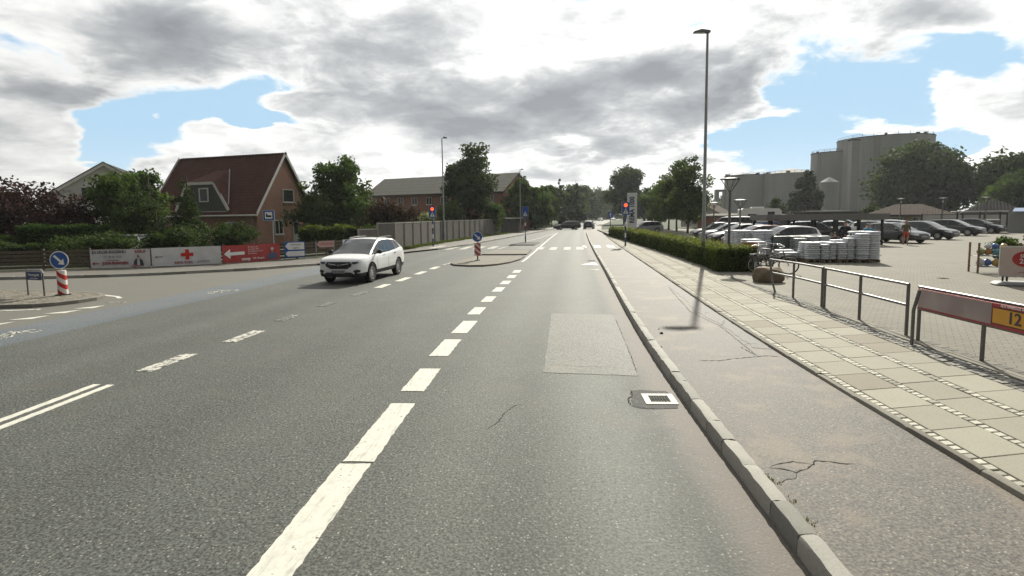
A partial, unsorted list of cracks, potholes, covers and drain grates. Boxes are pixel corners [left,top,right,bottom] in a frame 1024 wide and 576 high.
crack [668,286,779,361]
crack [769,460,852,484]
